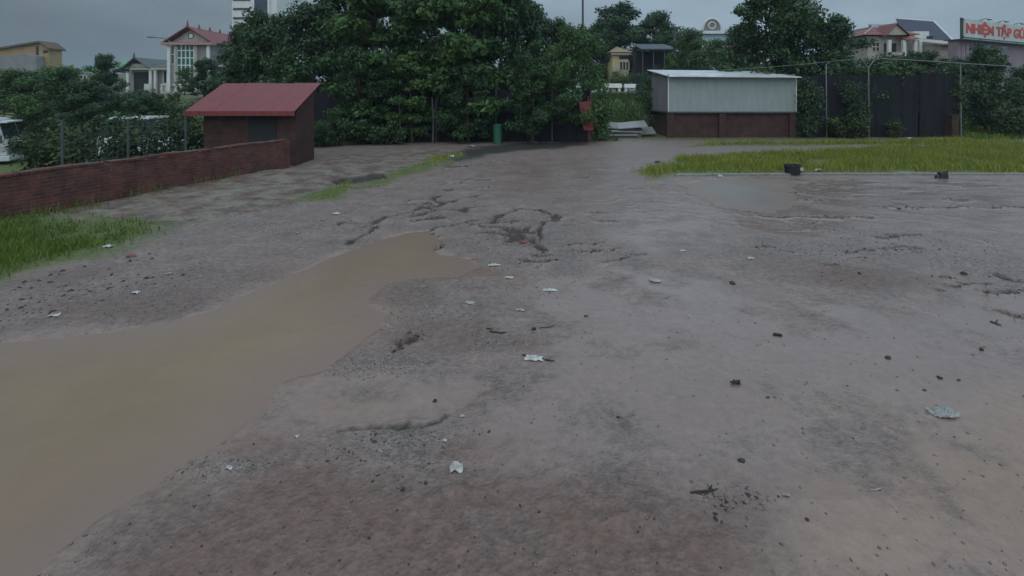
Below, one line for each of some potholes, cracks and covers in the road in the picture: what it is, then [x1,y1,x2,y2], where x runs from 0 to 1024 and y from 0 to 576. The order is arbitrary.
crack [342,157,562,263]
pothole [329,173,389,185]
crack [351,421,432,431]
pothole [0,230,480,576]
